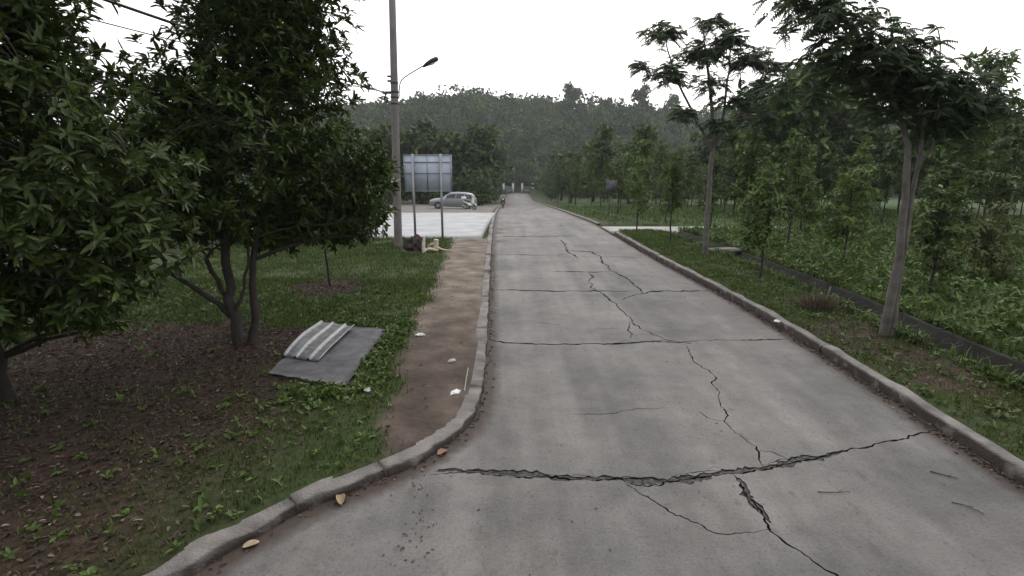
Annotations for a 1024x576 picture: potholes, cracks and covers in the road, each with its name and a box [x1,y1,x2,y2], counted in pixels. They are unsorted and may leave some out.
crack [431,225,932,576]
